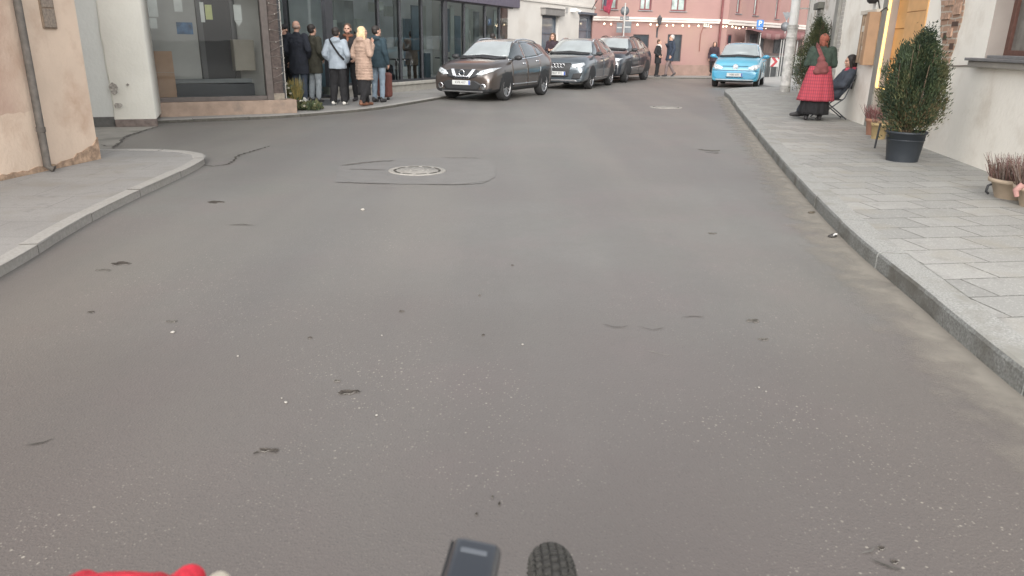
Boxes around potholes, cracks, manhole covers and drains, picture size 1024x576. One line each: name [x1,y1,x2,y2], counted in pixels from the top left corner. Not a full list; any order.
manhole cover [388,166,446,176]
crack [104,126,158,149]
